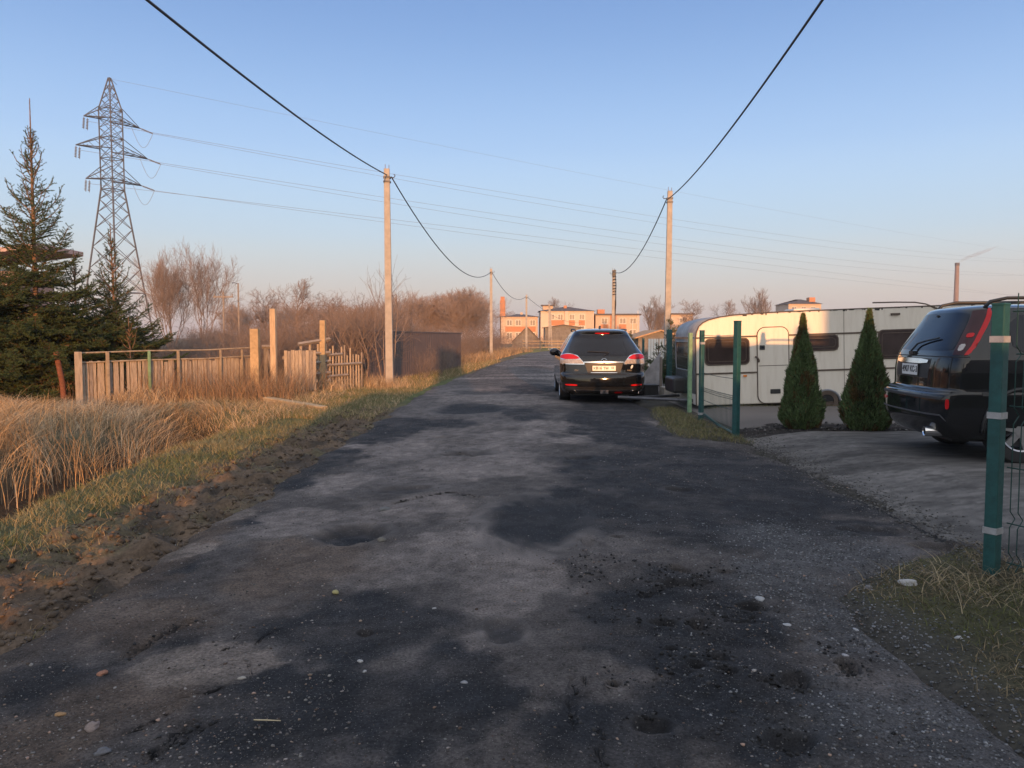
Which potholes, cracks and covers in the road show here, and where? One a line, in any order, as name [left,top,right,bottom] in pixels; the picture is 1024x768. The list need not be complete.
pothole [831,656,866,677]
pothole [476,615,532,649]
pothole [682,616,715,634]
pothole [623,714,682,737]
pothole [303,521,399,547]
pothole [744,723,834,757]
pothole [603,679,624,690]
pothole [732,600,774,613]
pothole [773,670,817,692]
crack [395,492,476,505]
